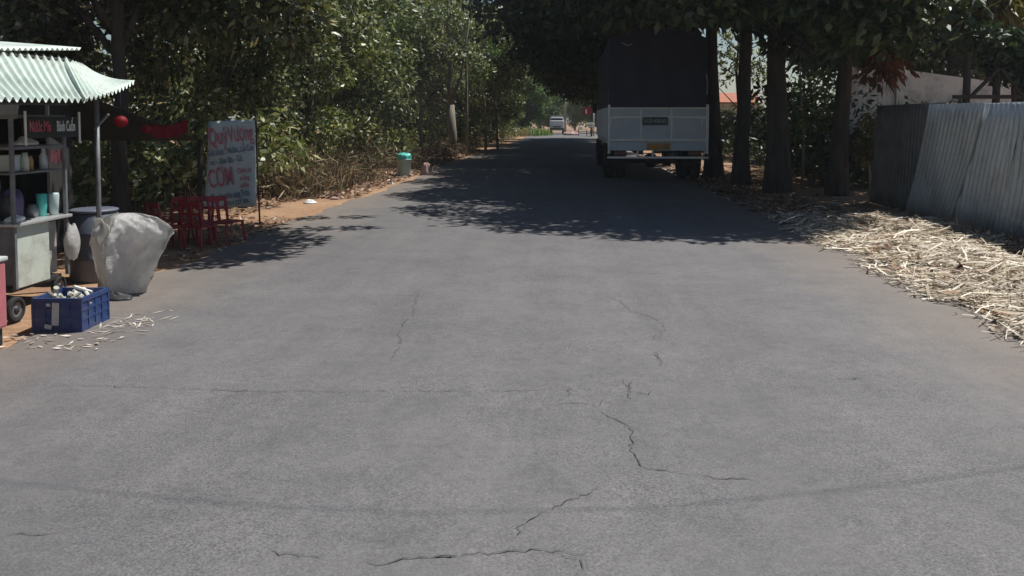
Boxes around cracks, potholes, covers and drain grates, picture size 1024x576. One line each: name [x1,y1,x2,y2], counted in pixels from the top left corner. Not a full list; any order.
crack [45,380,677,472]
crack [362,488,595,569]
